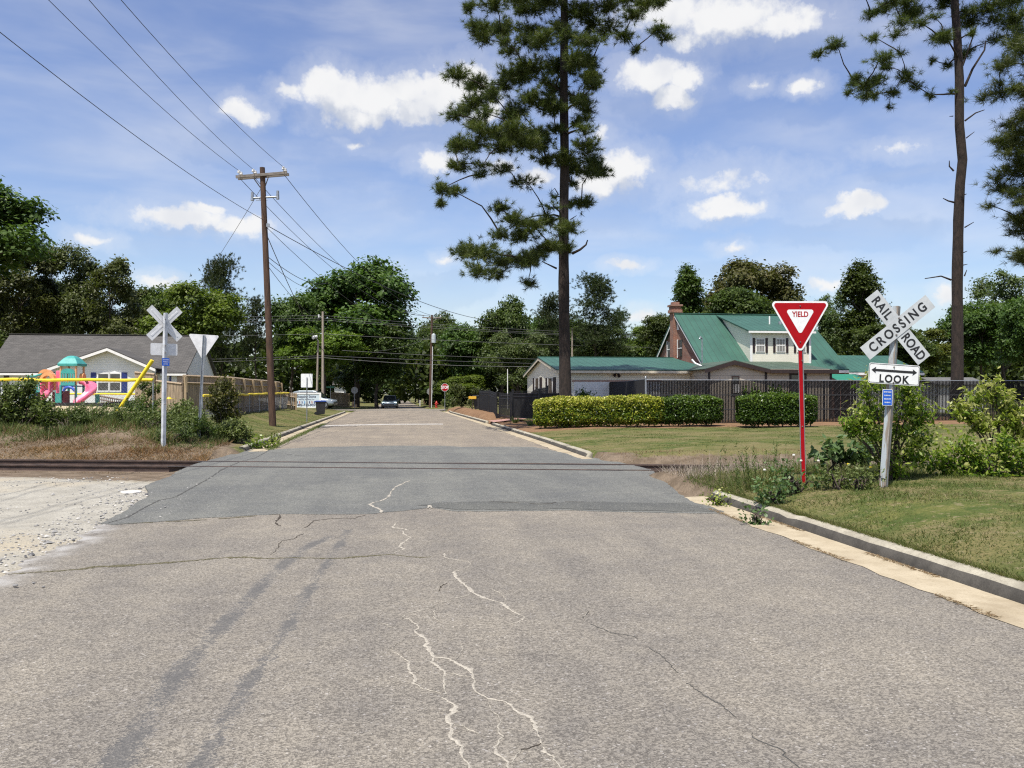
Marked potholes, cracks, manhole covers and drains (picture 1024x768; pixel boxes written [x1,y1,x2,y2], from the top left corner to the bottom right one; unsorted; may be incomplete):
crack [582,611,800,768]
crack [371,553,562,768]
crack [270,481,411,555]
